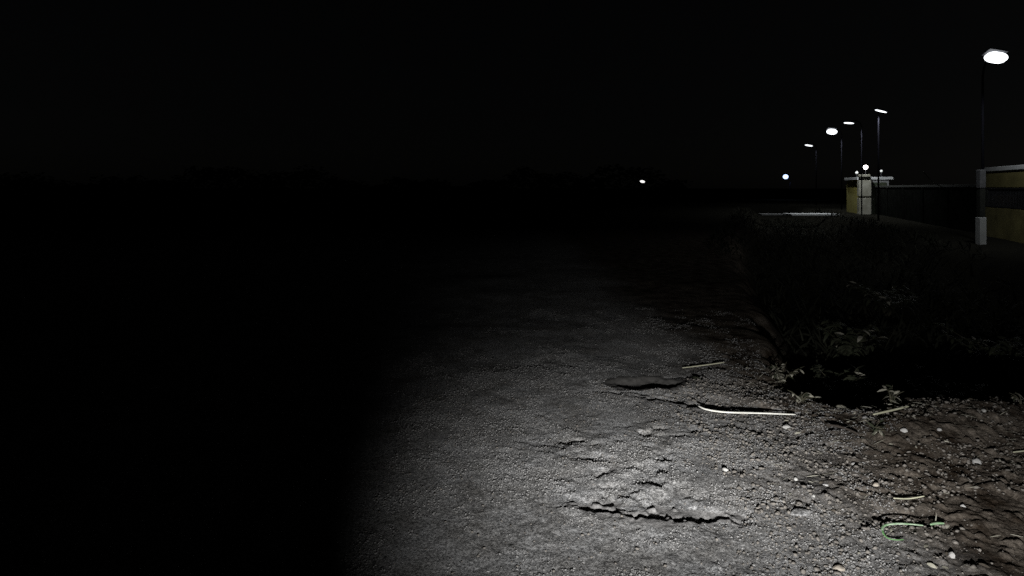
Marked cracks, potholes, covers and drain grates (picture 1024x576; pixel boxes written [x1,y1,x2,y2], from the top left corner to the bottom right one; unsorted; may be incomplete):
crack [590,466,634,480]
pothole [602,375,689,391]
crack [566,501,749,530]
